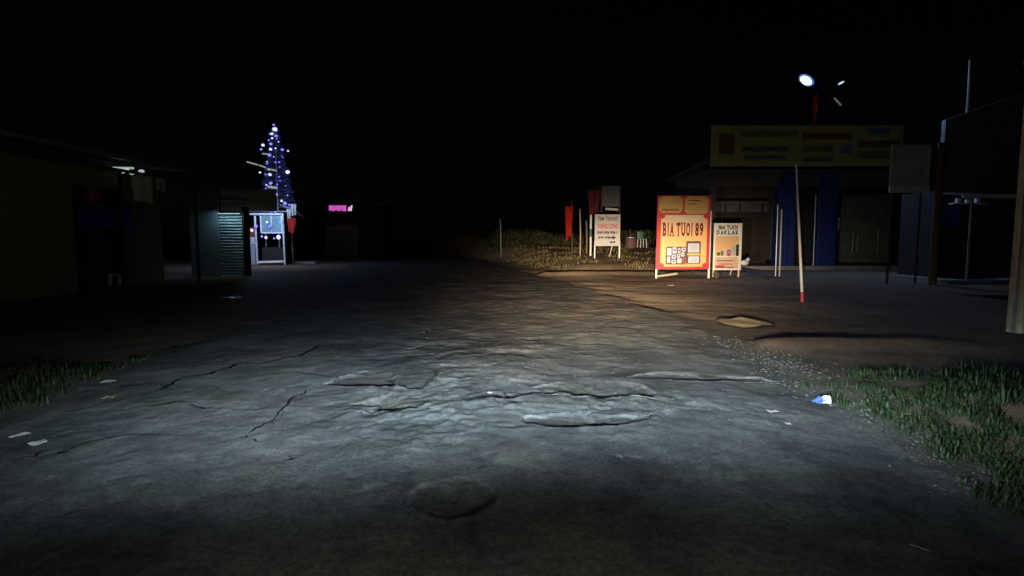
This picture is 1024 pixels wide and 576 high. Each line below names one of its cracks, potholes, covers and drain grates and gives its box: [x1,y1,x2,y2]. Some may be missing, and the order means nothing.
pothole [314,364,446,391]
pothole [513,379,664,400]
pothole [397,473,509,526]
crack [10,343,383,466]
pothole [515,410,665,430]
pothole [621,371,786,385]
pothole [335,390,444,415]
